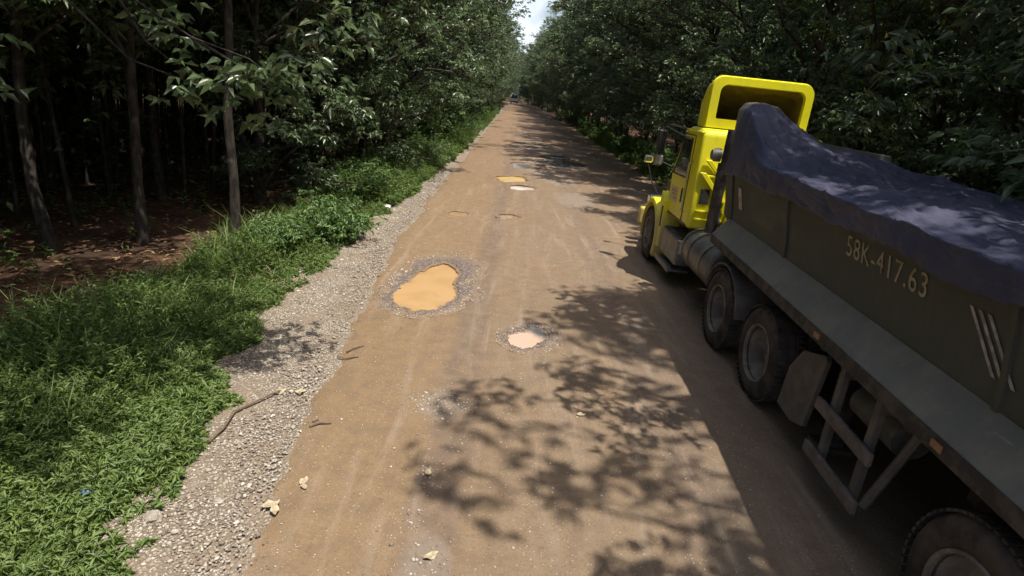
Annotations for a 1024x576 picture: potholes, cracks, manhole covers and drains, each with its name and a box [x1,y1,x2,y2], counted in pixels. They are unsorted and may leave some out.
pothole [495,319,565,354]
pothole [367,254,489,319]
pothole [503,184,542,192]
pothole [491,212,526,222]
pothole [501,160,558,172]
pothole [523,153,603,171]
pothole [443,209,474,218]
pothole [487,174,534,184]
